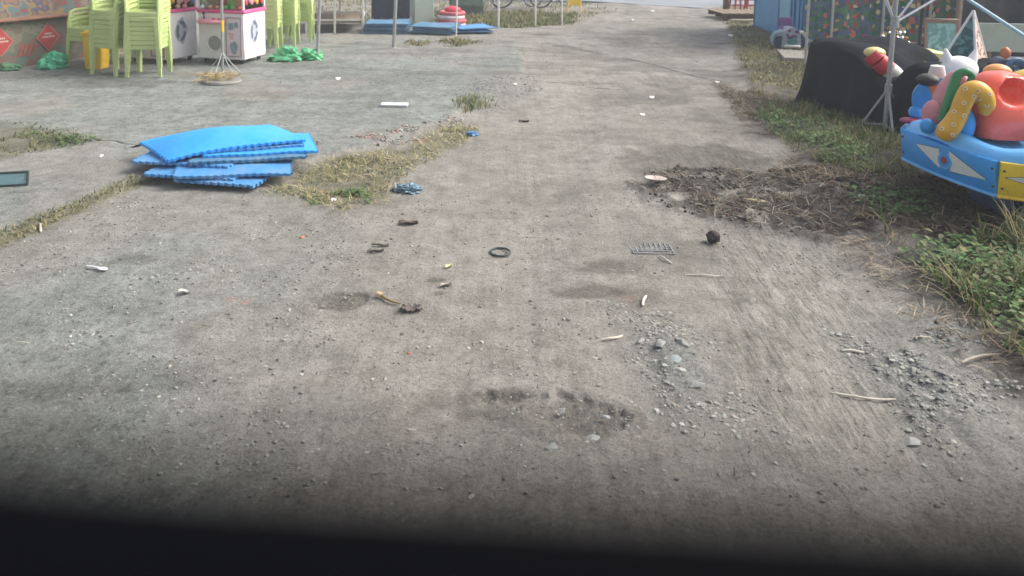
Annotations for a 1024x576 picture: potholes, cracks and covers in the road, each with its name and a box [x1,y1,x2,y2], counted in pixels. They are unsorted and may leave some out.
crack [78,135,142,149]
pothole [291,284,388,319]
pothole [454,378,652,453]
